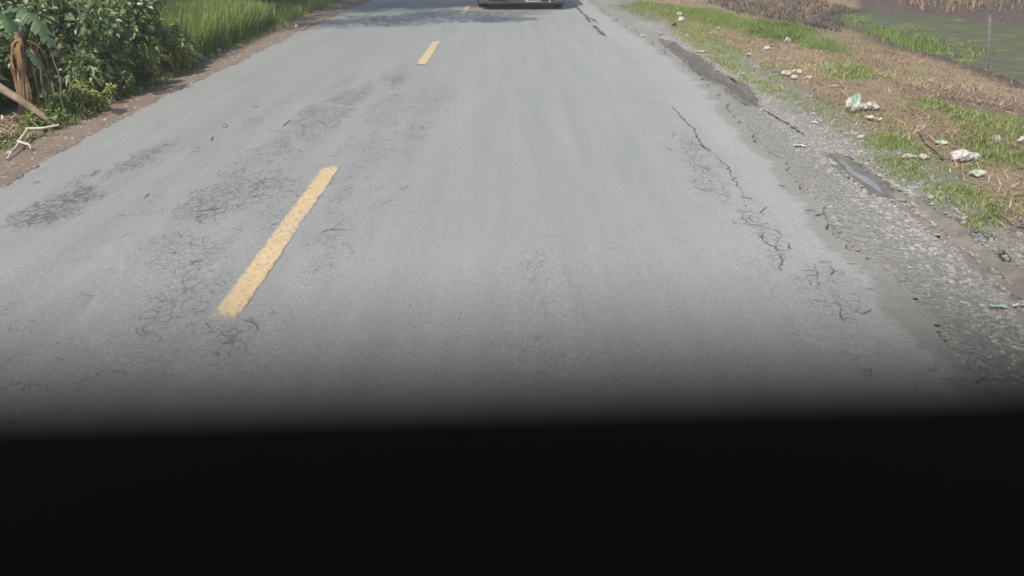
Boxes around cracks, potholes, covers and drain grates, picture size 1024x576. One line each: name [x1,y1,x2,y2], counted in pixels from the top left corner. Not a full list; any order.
pothole [657,39,759,107]
crack [668,107,790,270]
